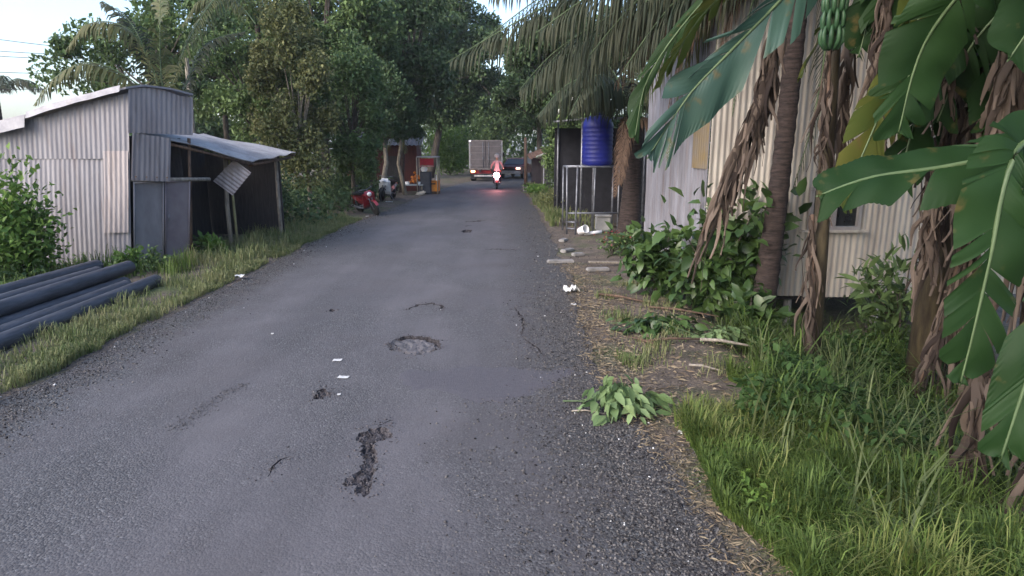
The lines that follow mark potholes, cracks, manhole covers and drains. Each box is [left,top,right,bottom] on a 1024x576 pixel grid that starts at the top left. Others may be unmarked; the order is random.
crack [514,307,546,357]
pothole [387,335,441,355]
pothole [342,426,393,497]
